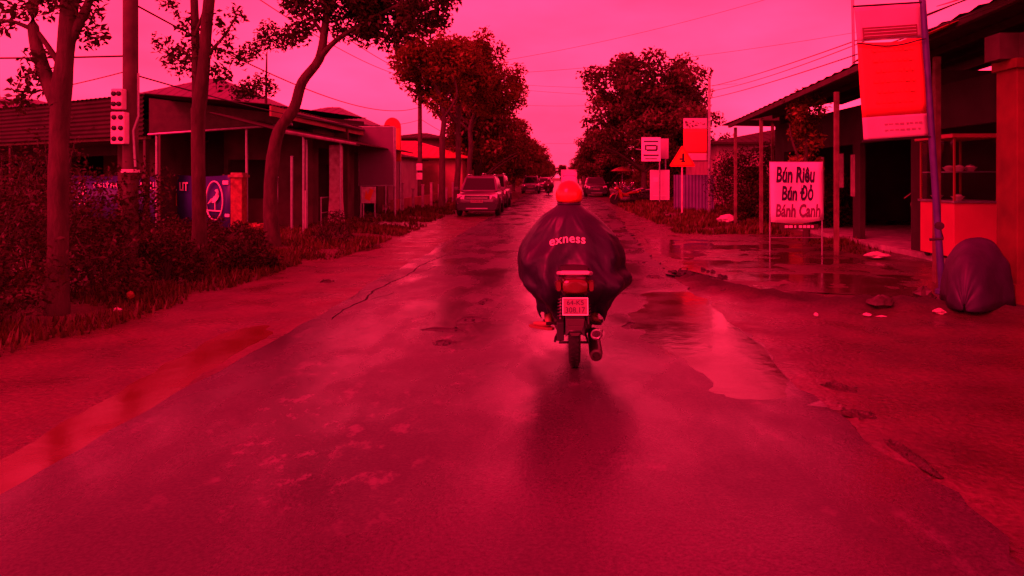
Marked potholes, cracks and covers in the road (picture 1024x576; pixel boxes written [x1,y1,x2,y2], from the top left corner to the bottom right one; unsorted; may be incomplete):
pothole [834,407,877,420]
crack [331,255,445,320]
pothole [456,316,488,324]
pothole [820,382,858,393]
pothole [883,439,944,479]
